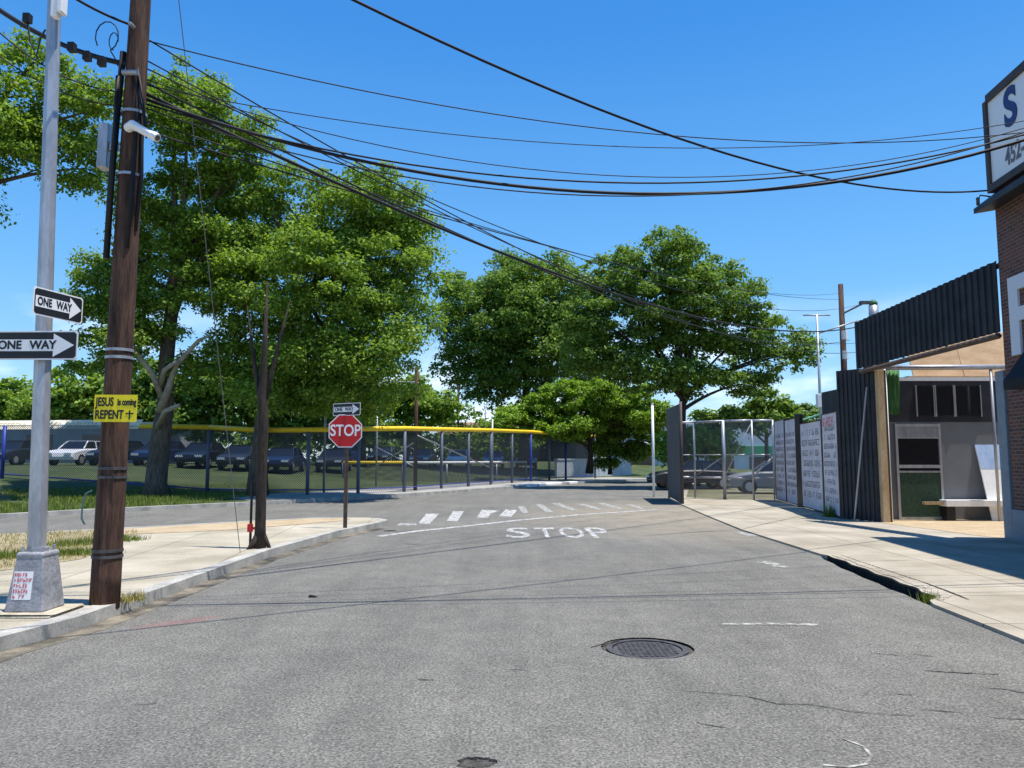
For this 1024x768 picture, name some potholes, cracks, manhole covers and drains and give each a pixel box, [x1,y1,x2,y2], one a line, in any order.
manhole cover [601,638,695,659]
crack [682,690,962,716]
pothole [827,555,933,602]
crack [918,654,1024,693]
